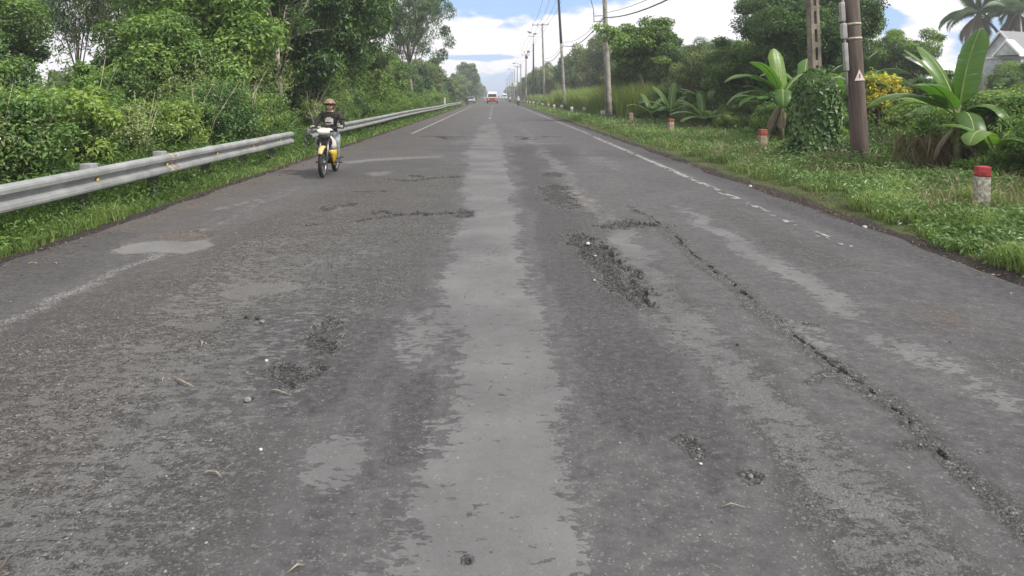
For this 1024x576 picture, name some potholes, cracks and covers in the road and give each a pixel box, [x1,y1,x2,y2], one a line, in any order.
pothole [536,183,582,210]
pothole [564,232,661,309]
pothole [739,471,763,485]
crack [355,164,459,193]
pothole [300,315,351,355]
crack [635,211,948,460]
pothole [267,361,329,390]
crack [362,210,448,221]
pothole [676,436,707,460]
